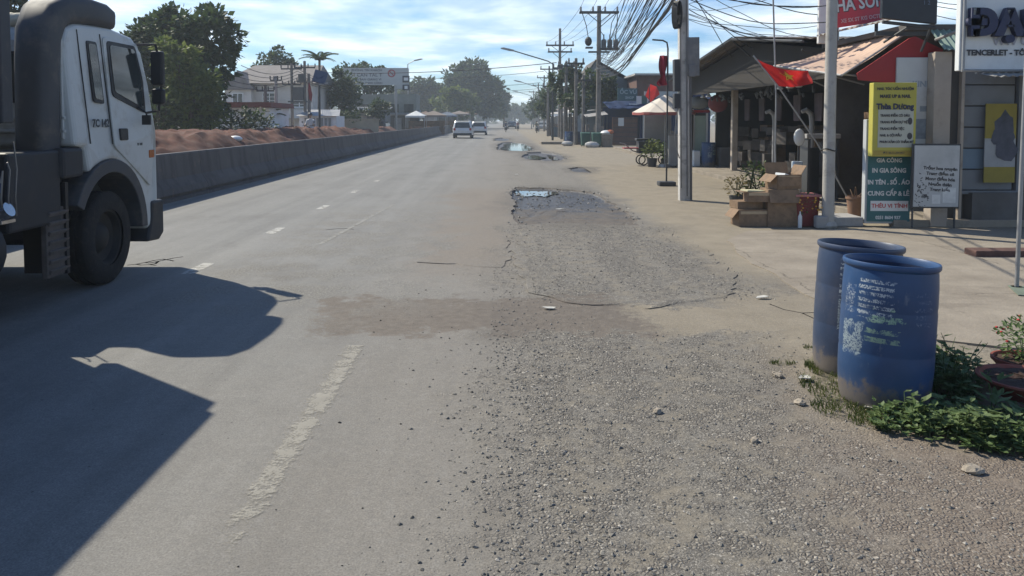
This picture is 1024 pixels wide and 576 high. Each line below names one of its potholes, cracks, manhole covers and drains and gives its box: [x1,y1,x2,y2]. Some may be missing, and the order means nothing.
pothole [510,187,640,226]
pothole [521,152,567,161]
crack [131,257,179,266]
